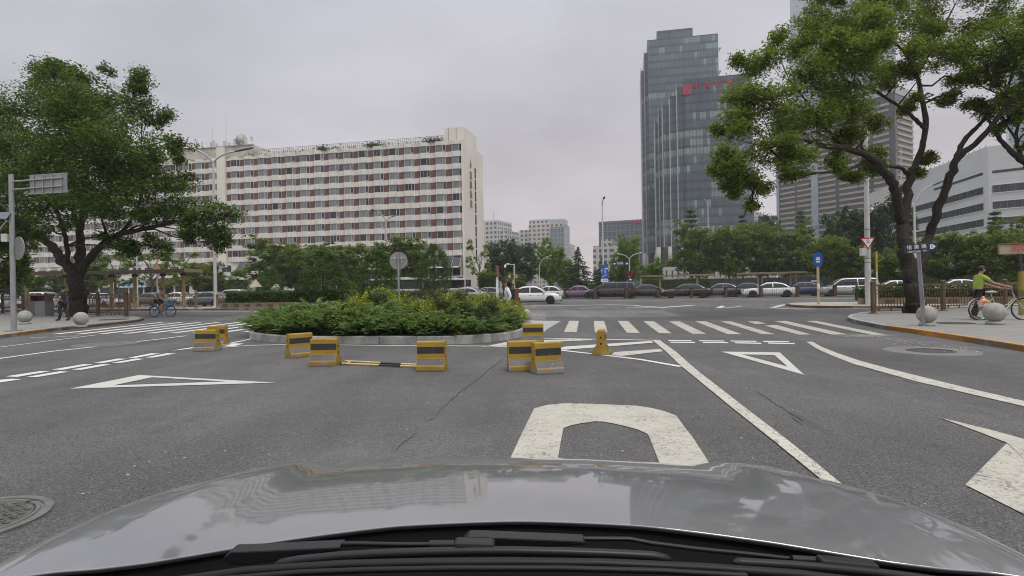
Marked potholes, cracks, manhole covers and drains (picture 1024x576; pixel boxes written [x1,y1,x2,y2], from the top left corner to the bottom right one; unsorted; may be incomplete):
manhole cover [0,495,54,534]
crack [756,391,803,425]
manhole cover [881,346,985,356]
crack [427,357,505,421]
